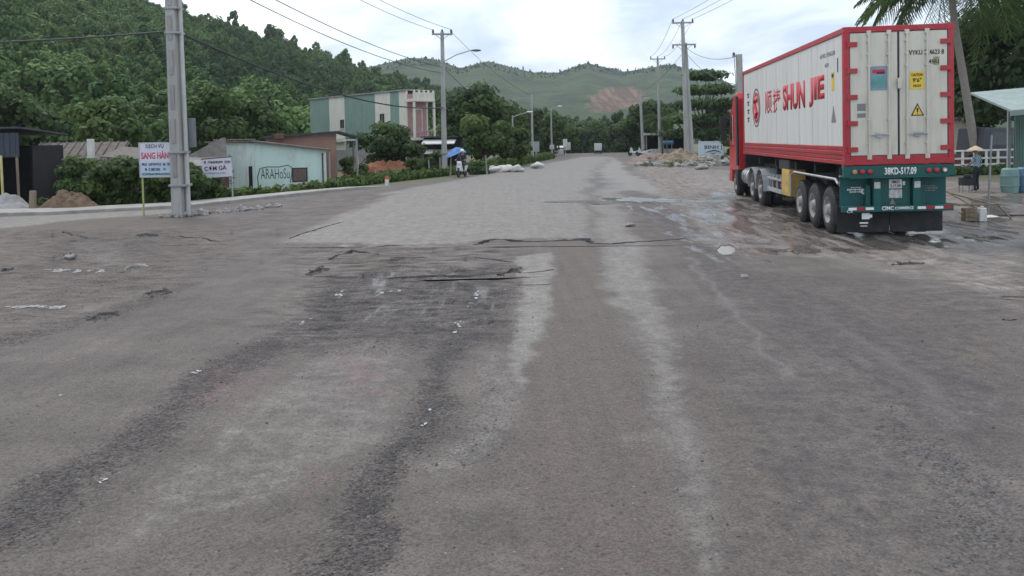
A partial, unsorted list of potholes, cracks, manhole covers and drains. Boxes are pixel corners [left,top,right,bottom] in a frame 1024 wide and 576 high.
crack [328,238,686,279]
pothole [85,310,120,322]
pothole [143,288,172,297]
crack [289,222,341,239]
